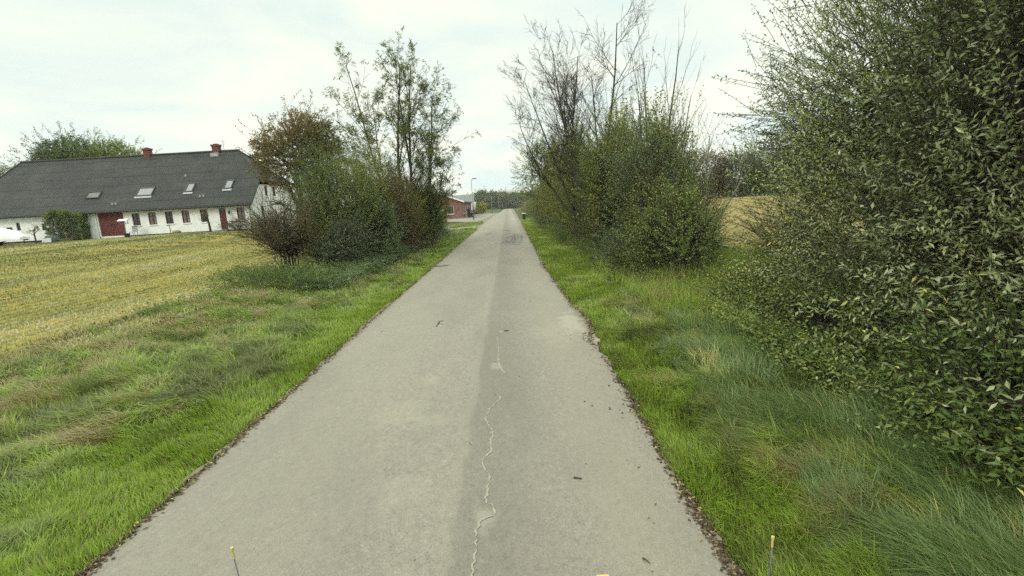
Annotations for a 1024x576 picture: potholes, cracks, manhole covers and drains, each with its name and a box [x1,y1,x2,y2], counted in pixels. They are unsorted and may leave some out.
crack [492,330,509,373]
